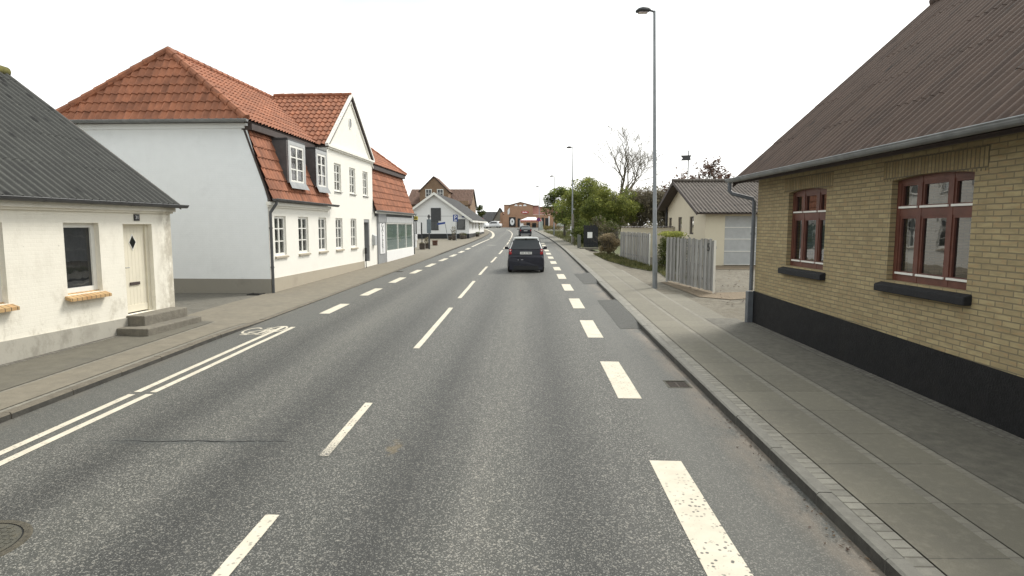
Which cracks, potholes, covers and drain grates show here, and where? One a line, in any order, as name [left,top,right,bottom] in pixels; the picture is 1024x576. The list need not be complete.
drain grate [663,380,693,388]
manhole cover [0,520,33,557]
